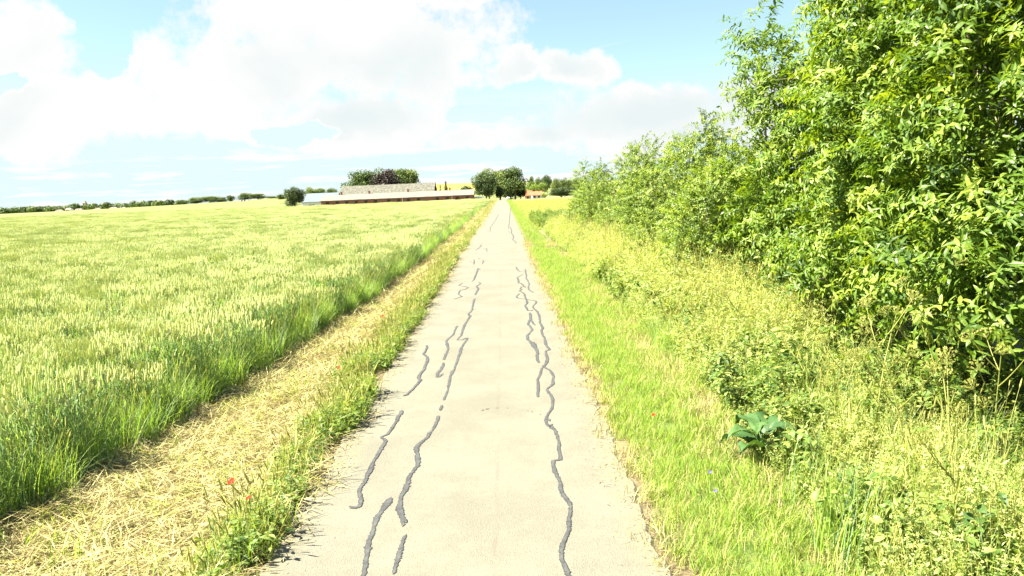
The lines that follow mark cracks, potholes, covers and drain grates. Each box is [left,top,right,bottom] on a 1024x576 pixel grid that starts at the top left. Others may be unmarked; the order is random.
crack [470,208,517,264]
